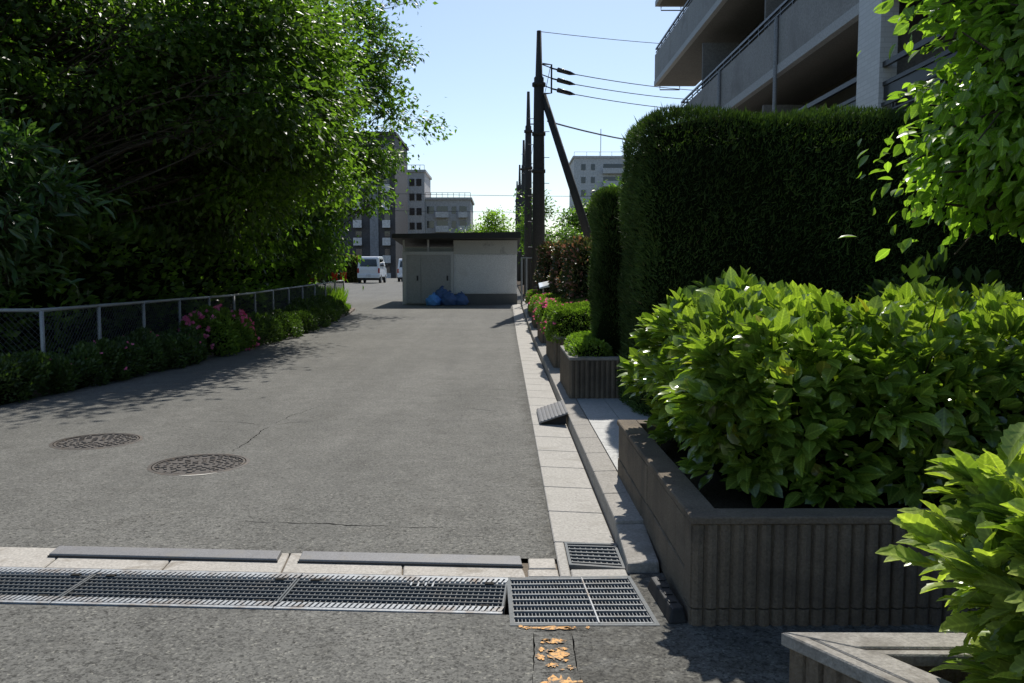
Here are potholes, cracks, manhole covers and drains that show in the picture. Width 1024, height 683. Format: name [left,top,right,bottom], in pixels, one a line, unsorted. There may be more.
drain grate [50,569,302,610]
drain grate [0,567,102,605]
drain grate [564,542,626,571]
manhole cover [147,453,250,476]
manhole cover [49,433,143,450]
drain grate [273,573,509,615]
